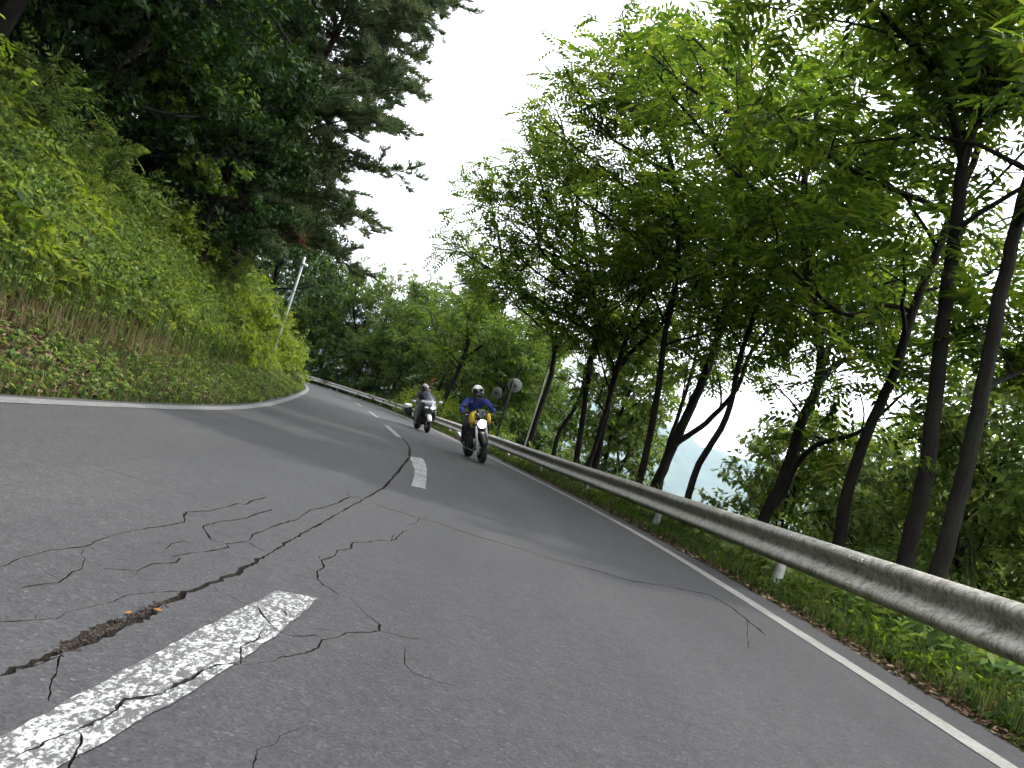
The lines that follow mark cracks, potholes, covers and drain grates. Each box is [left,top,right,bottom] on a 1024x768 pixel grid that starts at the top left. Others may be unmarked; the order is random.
crack [375,504,765,648]
crack [0,437,455,768]
